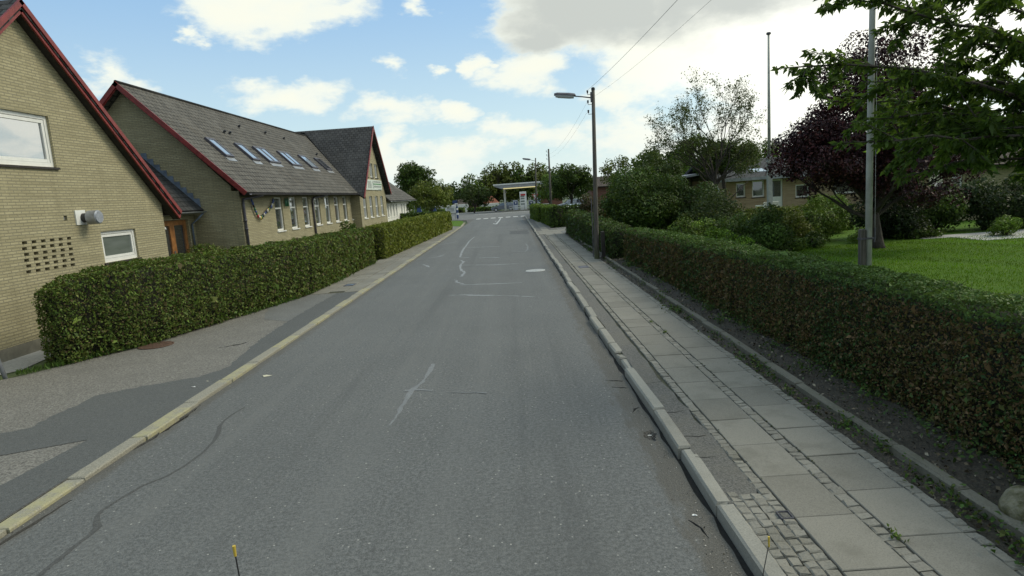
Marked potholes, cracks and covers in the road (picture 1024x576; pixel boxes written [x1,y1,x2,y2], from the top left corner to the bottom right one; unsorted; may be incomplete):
manhole cover [138,341,174,349]
utility cover [776,510,794,521]
